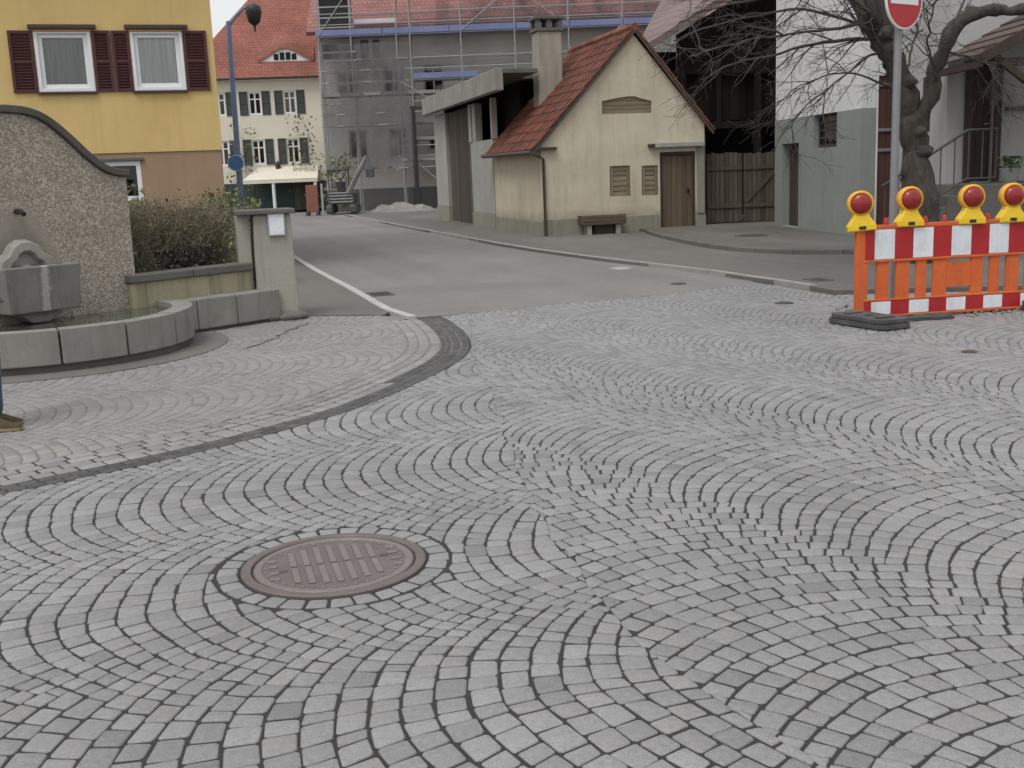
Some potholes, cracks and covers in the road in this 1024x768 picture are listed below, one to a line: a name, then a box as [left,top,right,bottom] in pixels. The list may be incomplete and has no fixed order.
manhole cover [241,533,426,600]
crack [246,324,308,349]
